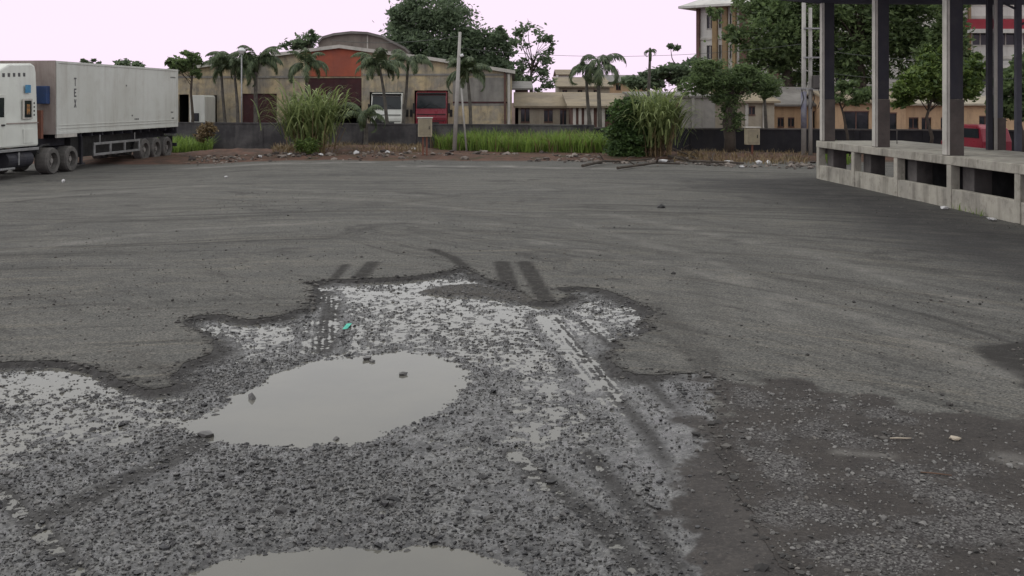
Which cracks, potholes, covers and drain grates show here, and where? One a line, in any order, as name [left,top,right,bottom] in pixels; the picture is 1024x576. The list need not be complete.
pothole [0,268,789,576]
